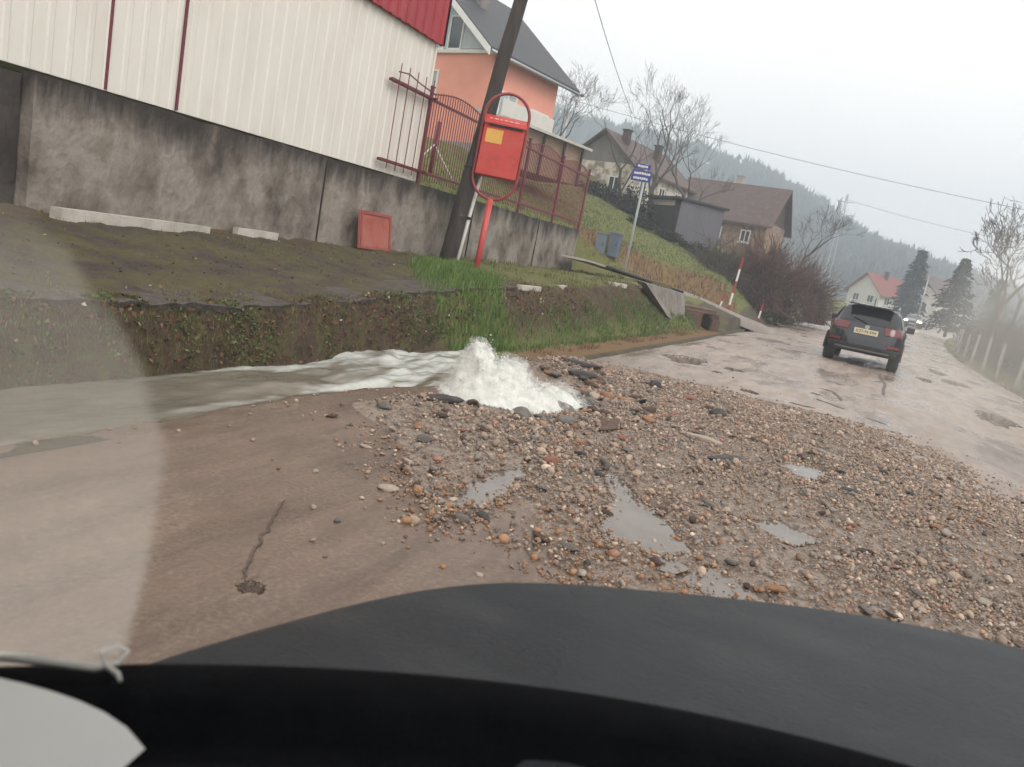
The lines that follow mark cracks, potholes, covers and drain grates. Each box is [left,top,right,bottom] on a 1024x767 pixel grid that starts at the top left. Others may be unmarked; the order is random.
pothole [661,354,708,365]
crack [791,380,844,409]
pothole [974,410,1023,429]
crack [875,373,887,396]
crack [242,500,285,577]
pothole [235,579,265,594]
